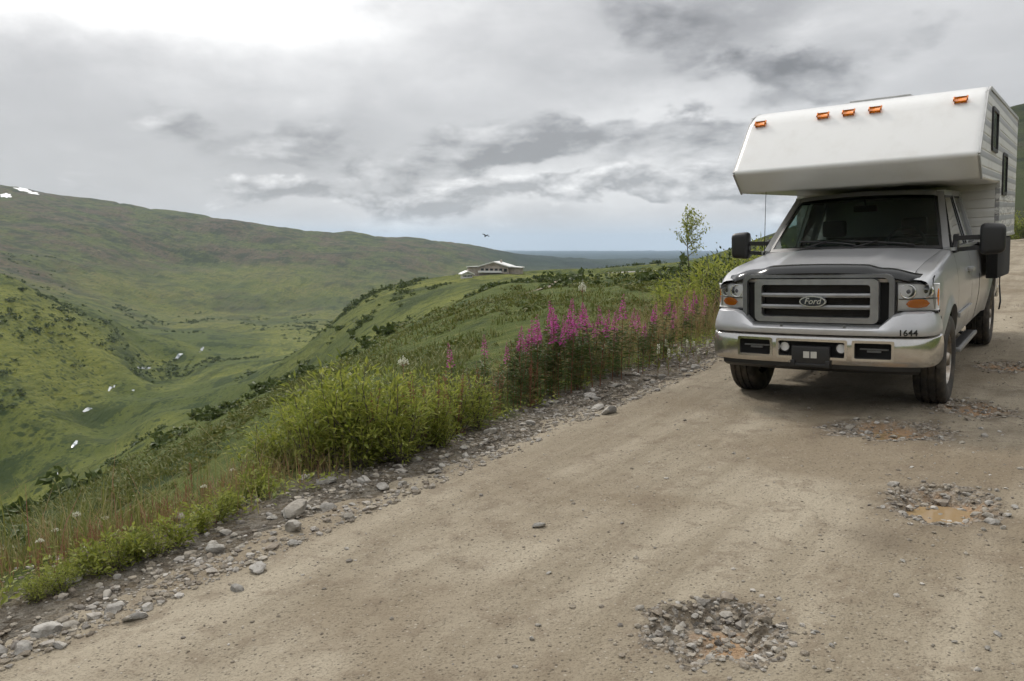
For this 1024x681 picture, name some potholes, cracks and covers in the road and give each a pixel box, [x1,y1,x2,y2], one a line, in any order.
pothole [811,418,964,442]
pothole [972,361,1024,373]
pothole [928,398,1022,419]
pothole [637,597,791,671]
pothole [883,483,1010,527]
